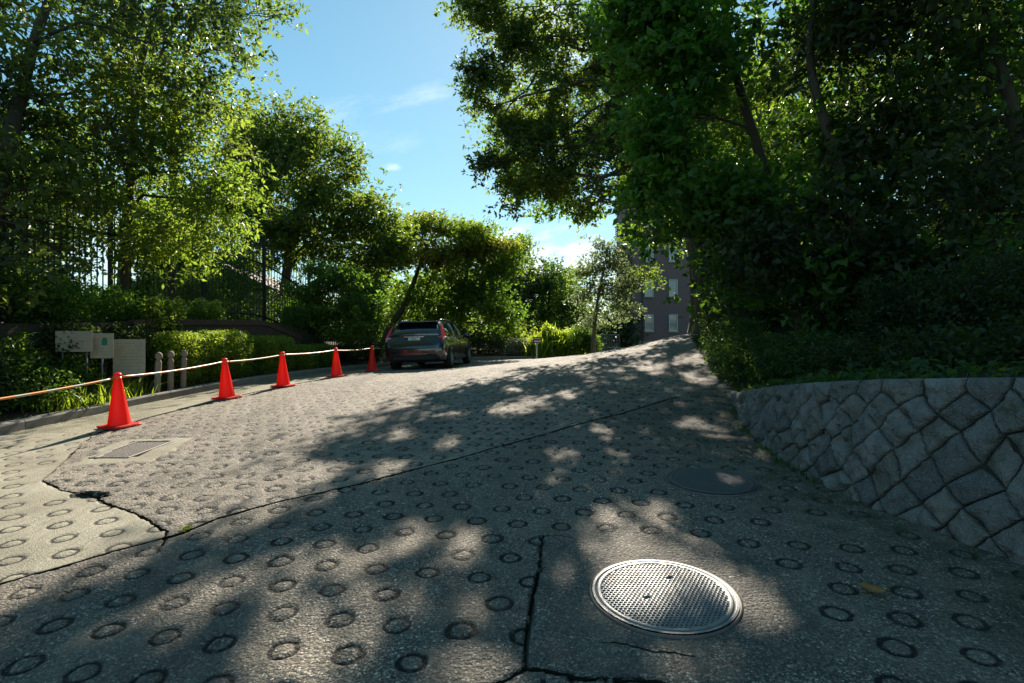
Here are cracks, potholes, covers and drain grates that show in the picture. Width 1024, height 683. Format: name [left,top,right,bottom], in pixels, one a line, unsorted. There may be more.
crack [0,396,678,585]
crack [495,535,695,683]
drain grate [89,441,173,459]
manhole cover [589,559,744,639]
manhole cover [665,467,760,497]
pothole [70,491,110,499]
